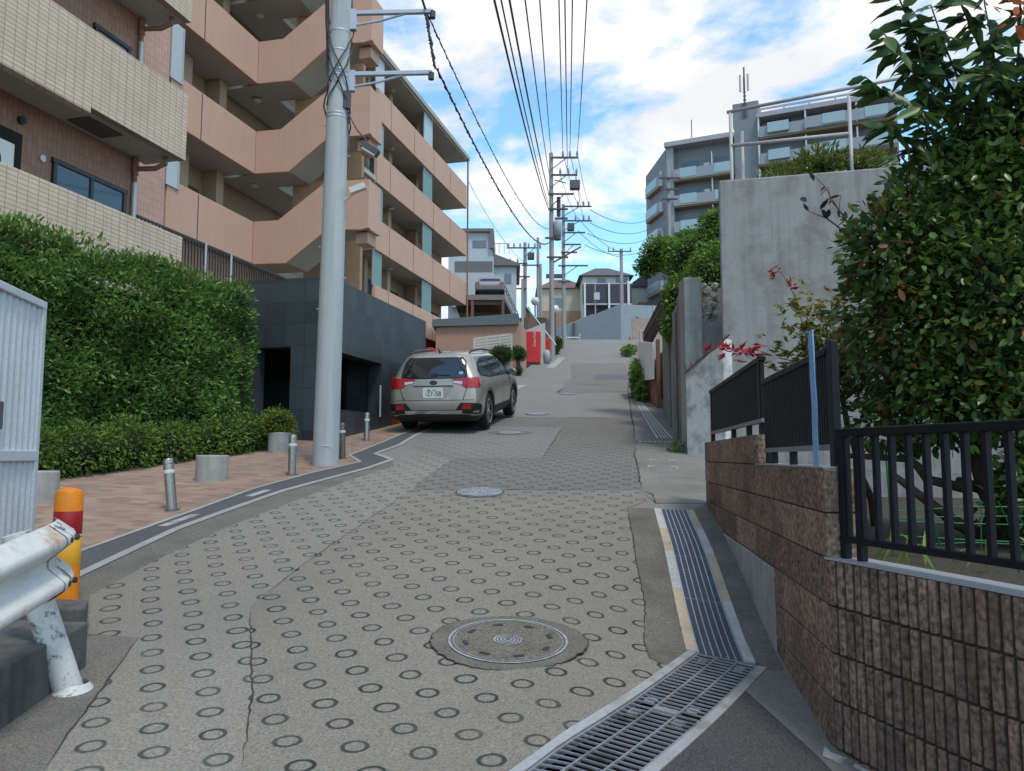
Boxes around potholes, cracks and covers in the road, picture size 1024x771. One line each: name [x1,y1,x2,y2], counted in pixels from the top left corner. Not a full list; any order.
drain grate [635,399,673,439]
drain grate [654,508,756,664]
manhole cover [453,487,507,497]
drain grate [510,650,767,771]
crack [242,609,263,765]
manhole cover [429,616,589,671]
crack [251,496,402,606]
